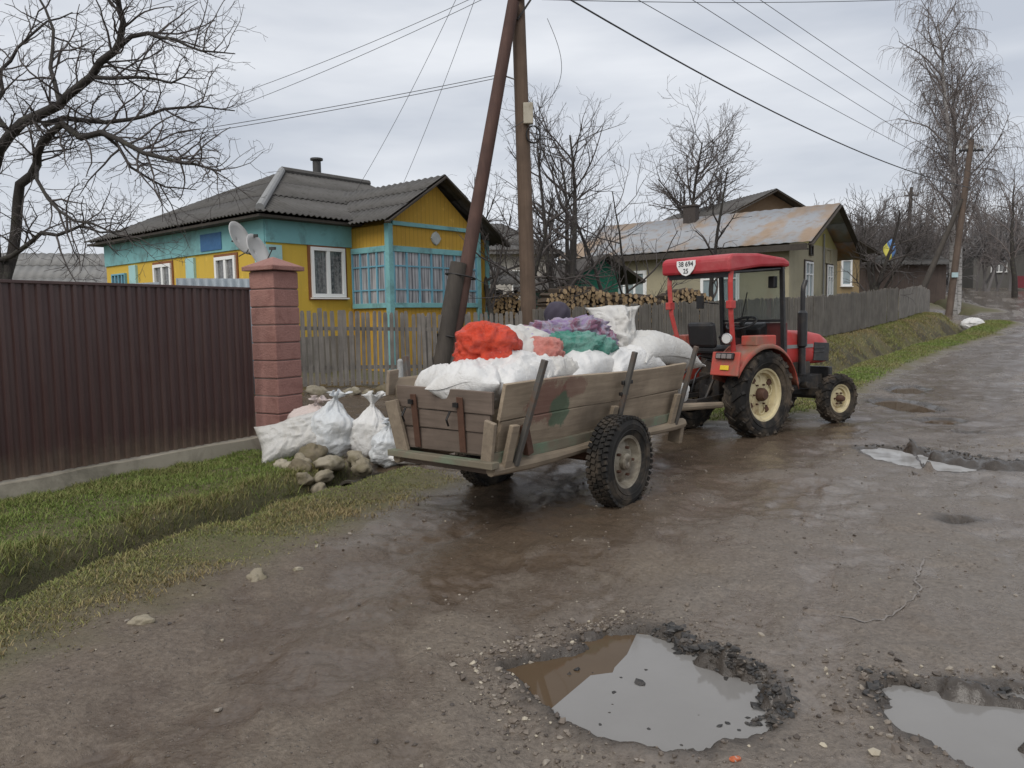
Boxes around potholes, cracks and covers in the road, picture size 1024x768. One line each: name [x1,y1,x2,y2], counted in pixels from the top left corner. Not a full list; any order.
pothole [486,619,804,763]
pothole [925,512,993,526]
pothole [851,438,1024,474]
pothole [881,385,932,394]
pothole [853,666,1024,768]
pothole [862,397,948,413]
crack [800,552,931,627]
